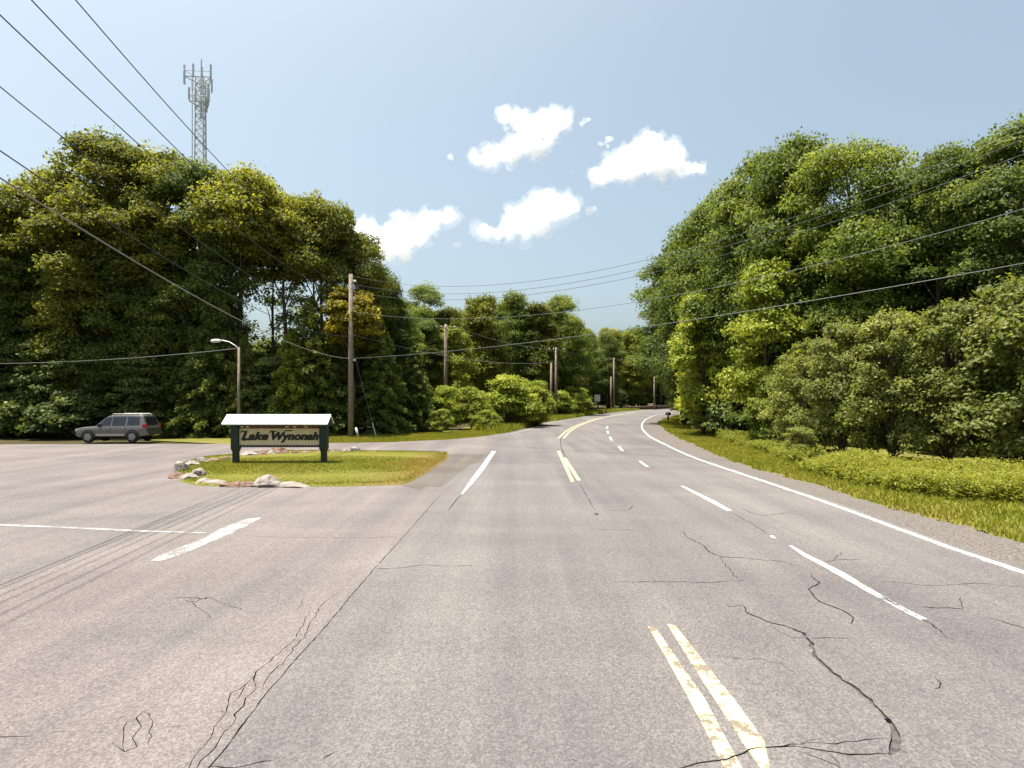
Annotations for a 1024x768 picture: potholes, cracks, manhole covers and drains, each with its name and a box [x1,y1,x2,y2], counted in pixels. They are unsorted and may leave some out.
crack [112,594,336,768]
crack [642,531,797,583]
crack [682,552,907,768]
